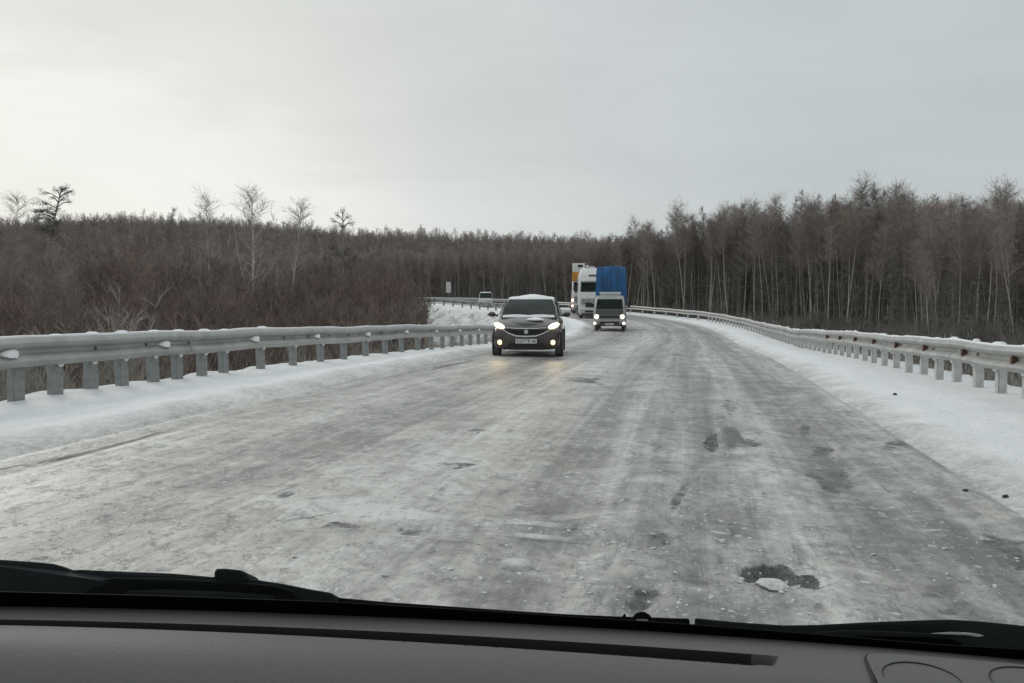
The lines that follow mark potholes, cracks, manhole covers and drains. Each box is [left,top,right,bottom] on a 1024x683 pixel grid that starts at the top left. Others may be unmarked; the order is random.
pothole [730,559,831,593]
pothole [613,578,674,617]
pothole [698,427,724,456]
